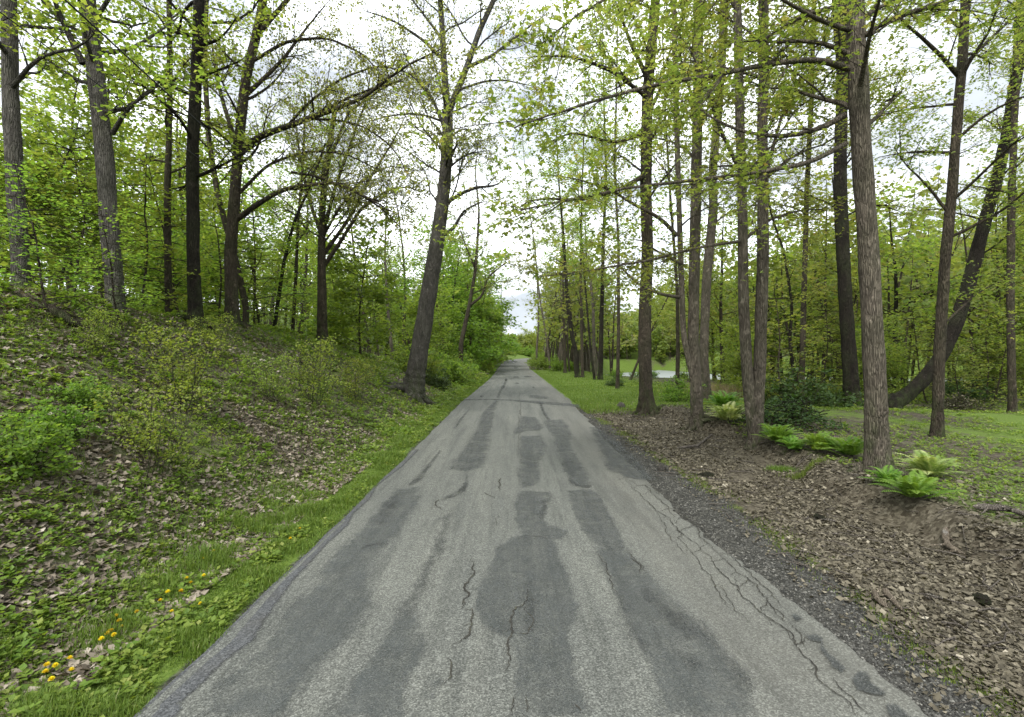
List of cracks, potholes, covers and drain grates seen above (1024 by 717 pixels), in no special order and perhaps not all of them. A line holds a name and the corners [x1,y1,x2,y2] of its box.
crack [621,477,867,715]
crack [444,559,475,684]
crack [504,589,537,672]
